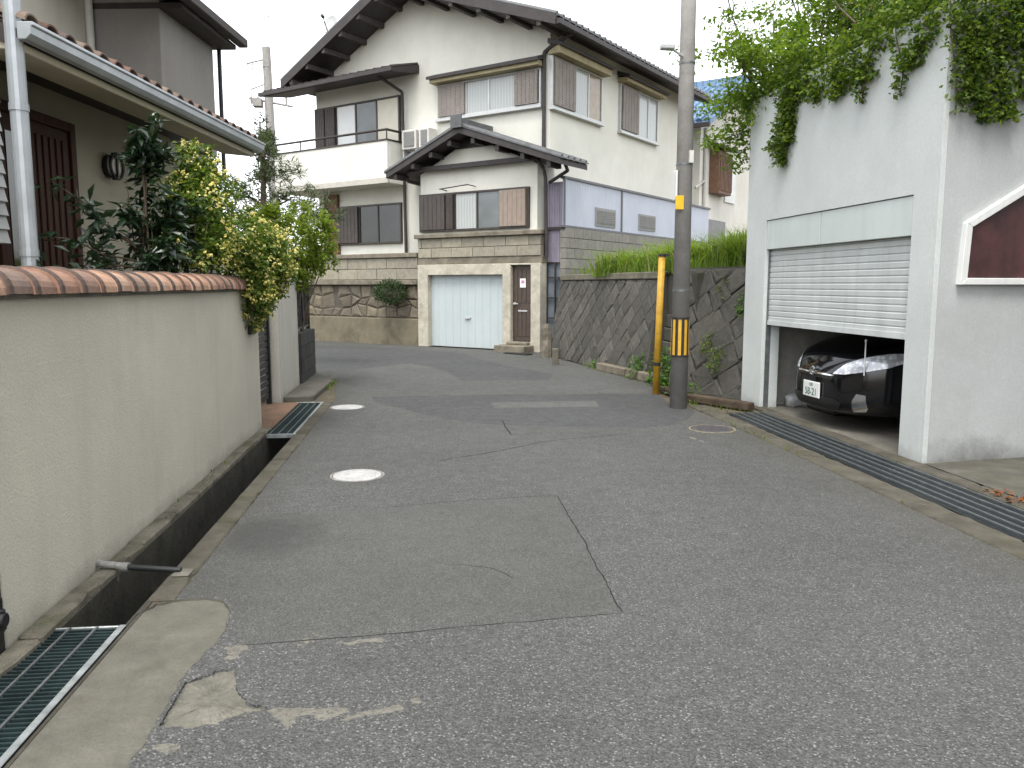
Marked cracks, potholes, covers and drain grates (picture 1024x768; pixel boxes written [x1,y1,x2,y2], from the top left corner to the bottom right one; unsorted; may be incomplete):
crack [436,420,627,462]
crack [247,496,658,645]
drain grate [0,625,126,768]
manhole cover [330,469,385,482]
drain grate [266,402,323,438]
drain grate [727,412,913,472]
manhole cover [689,425,736,433]
